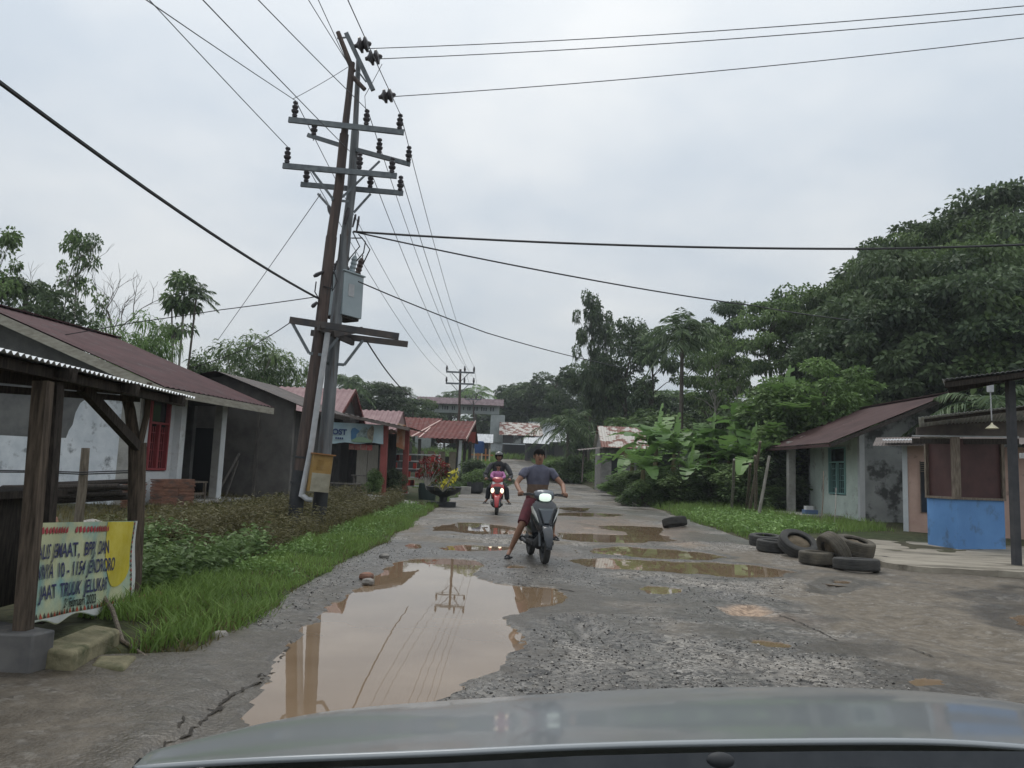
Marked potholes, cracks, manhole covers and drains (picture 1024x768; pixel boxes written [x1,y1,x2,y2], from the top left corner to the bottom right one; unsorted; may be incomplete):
pothole [632,584,690,595]
crack [158,641,292,749]
pothole [554,556,800,578]
pothole [228,557,575,728]
pothole [555,523,680,543]
pothole [800,577,869,596]
pothole [436,543,519,552]
pothole [428,521,526,535]
pothole [575,544,734,562]
